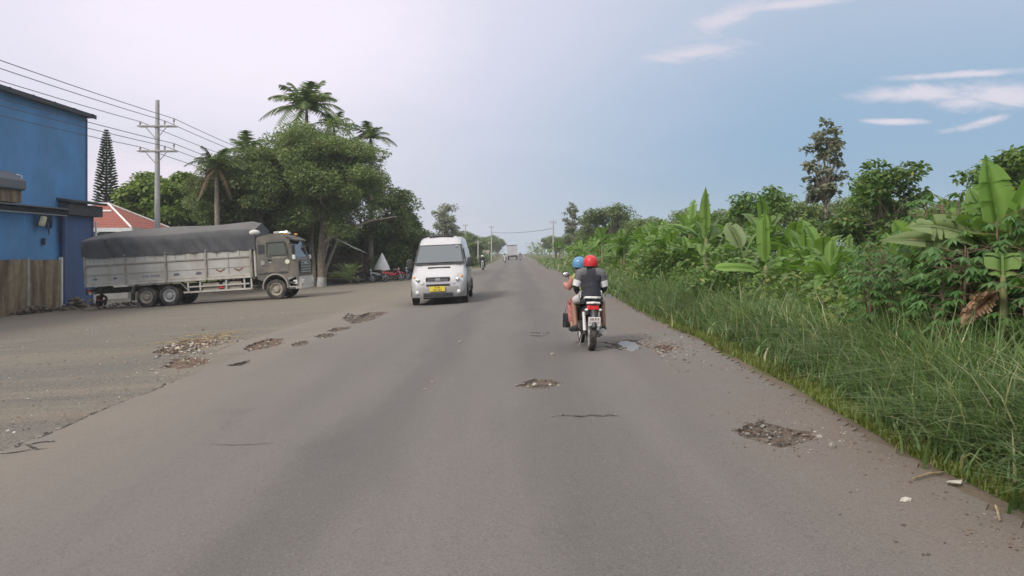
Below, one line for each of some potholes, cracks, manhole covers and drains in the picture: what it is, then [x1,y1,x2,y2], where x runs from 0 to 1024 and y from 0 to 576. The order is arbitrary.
crack [1,440,56,454]
pothole [240,337,285,352]
pothole [614,339,644,352]
pothole [342,311,388,324]
pothole [150,332,245,356]
pothole [515,379,563,389]
pothole [731,418,824,448]
pothole [159,356,212,370]
